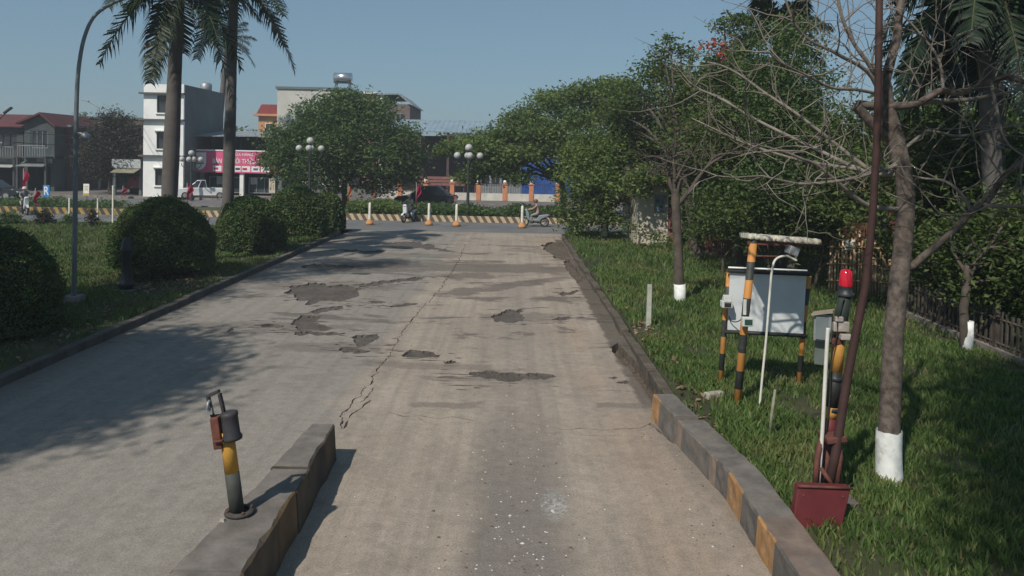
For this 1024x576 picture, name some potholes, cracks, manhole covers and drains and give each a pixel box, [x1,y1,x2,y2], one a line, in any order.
pothole [268,315,345,336]
pothole [275,282,394,306]
pothole [368,345,460,364]
pothole [541,242,570,260]
pothole [435,369,556,390]
pothole [482,307,545,325]
crack [387,411,474,425]
